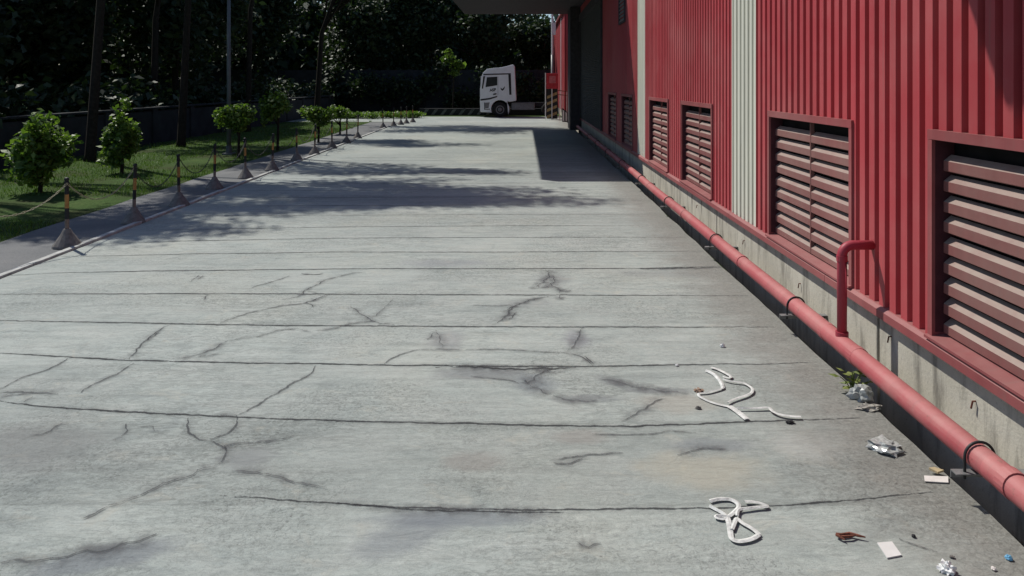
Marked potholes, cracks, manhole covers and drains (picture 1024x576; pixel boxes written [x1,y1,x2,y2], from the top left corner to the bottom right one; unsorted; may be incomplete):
crack [1,358,68,402]
crack [384,327,724,455]
crack [81,324,171,392]
crack [1,533,157,563]
crack [551,452,623,464]
crack [84,366,323,518]
crack [485,271,571,323]
